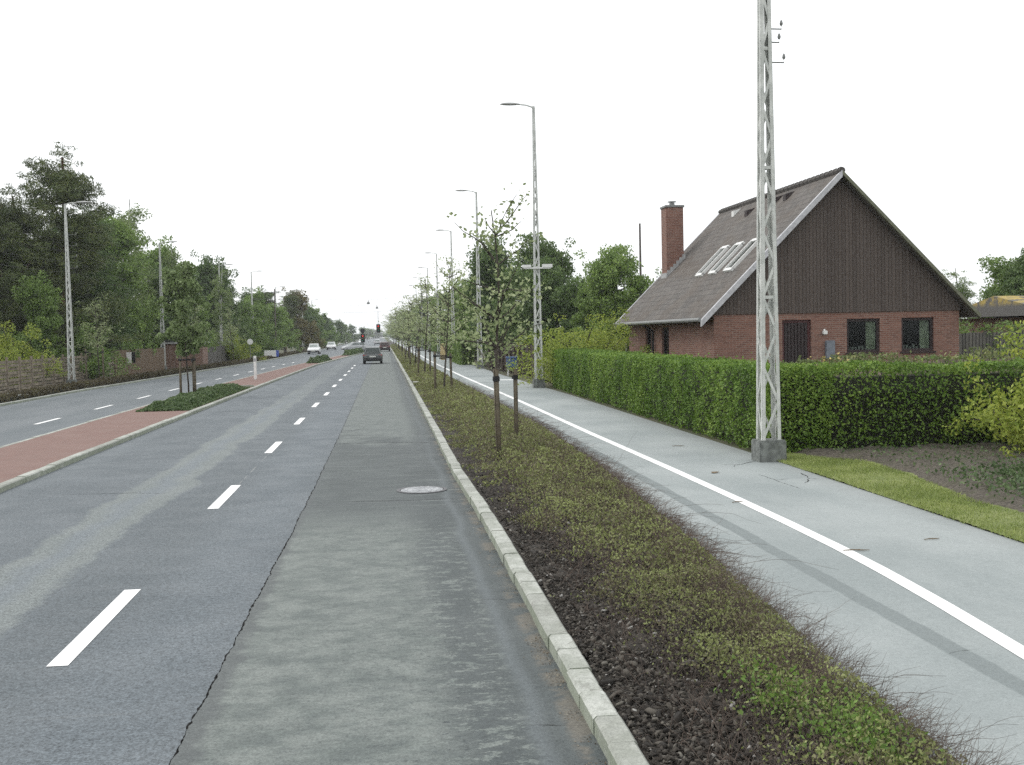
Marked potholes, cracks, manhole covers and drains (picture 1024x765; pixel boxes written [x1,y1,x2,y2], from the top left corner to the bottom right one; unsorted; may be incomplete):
manhole cover [396,486,447,494]
crack [169,363,414,765]
